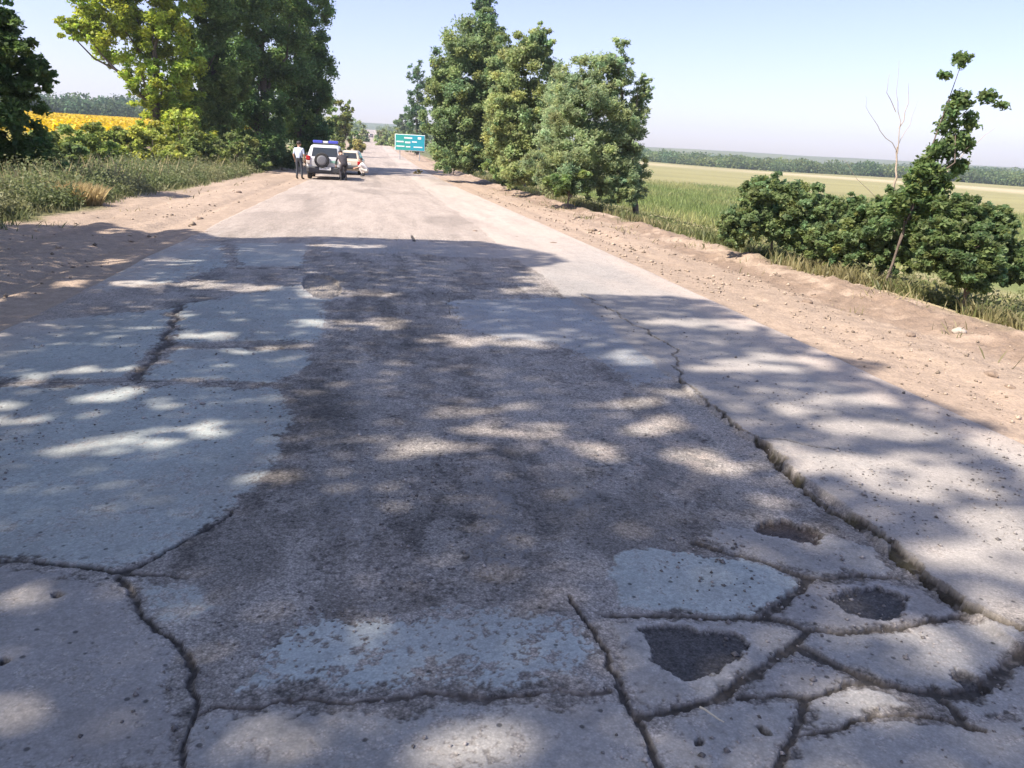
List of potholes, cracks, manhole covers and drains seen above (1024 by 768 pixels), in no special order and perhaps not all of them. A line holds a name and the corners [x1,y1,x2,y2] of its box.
crack [567,294,1024,768]
pothole [825,584,913,621]
crack [0,511,234,768]
pothole [753,518,826,546]
pothole [634,623,752,681]
